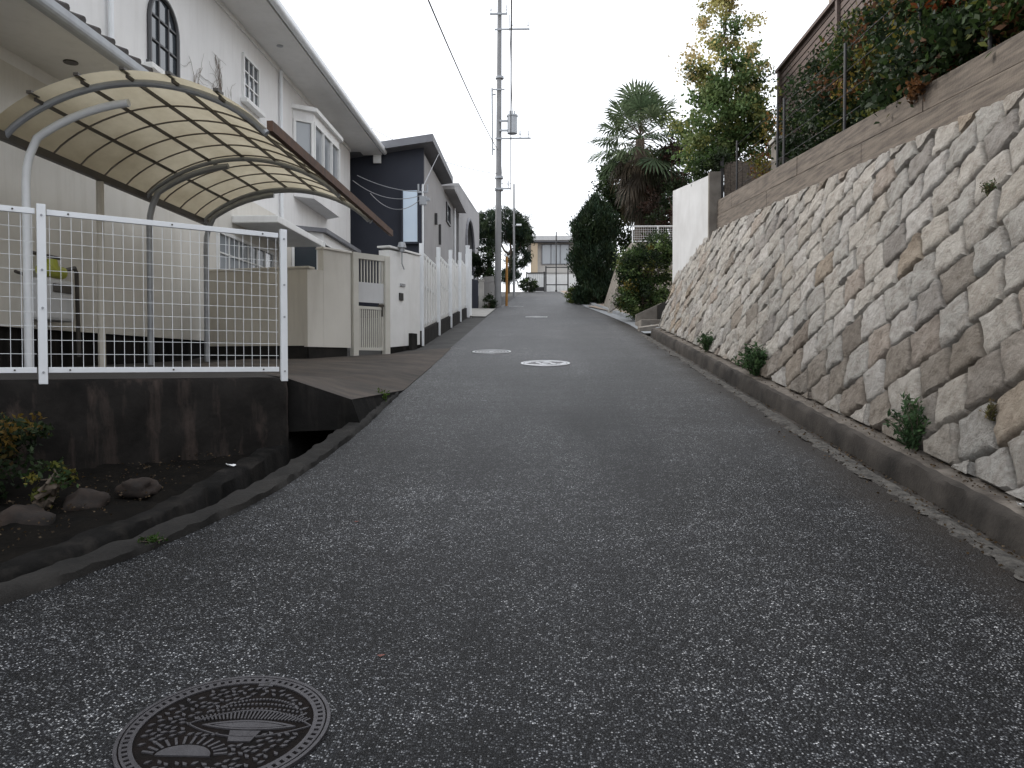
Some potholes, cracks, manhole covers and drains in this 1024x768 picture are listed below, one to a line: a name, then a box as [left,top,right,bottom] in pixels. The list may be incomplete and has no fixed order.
manhole cover [112,675,331,768]
